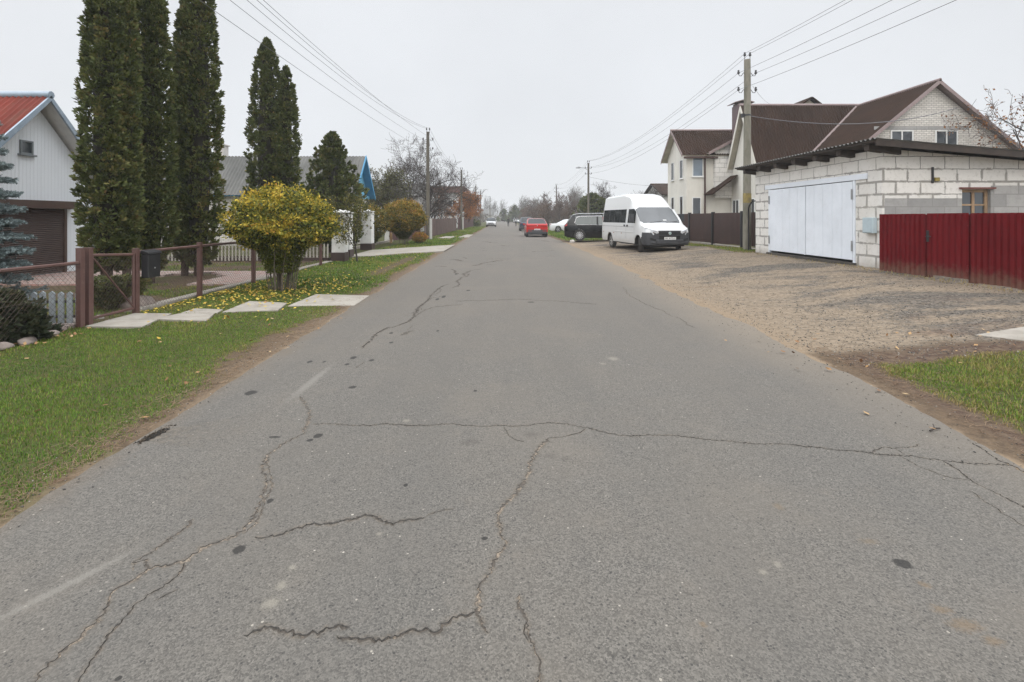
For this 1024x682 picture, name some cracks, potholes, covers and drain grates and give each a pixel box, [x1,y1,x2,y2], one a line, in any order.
crack [35,397,1024,682]
crack [356,242,587,368]
